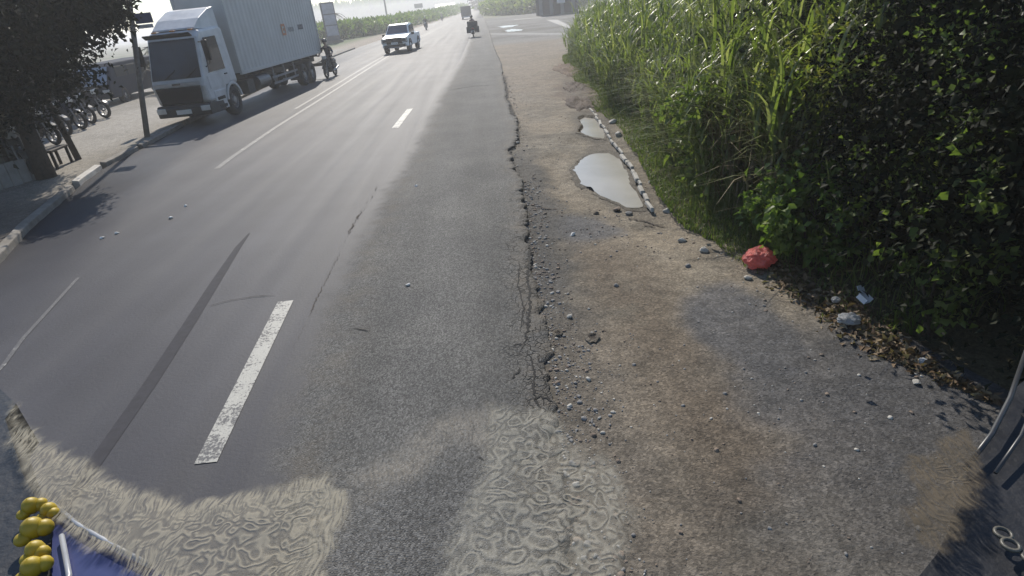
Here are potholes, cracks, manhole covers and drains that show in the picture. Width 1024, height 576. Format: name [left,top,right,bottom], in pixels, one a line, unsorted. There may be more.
crack [298,186,377,341]
pothole [575,114,610,140]
pothole [569,152,647,212]
crack [504,78,520,170]
